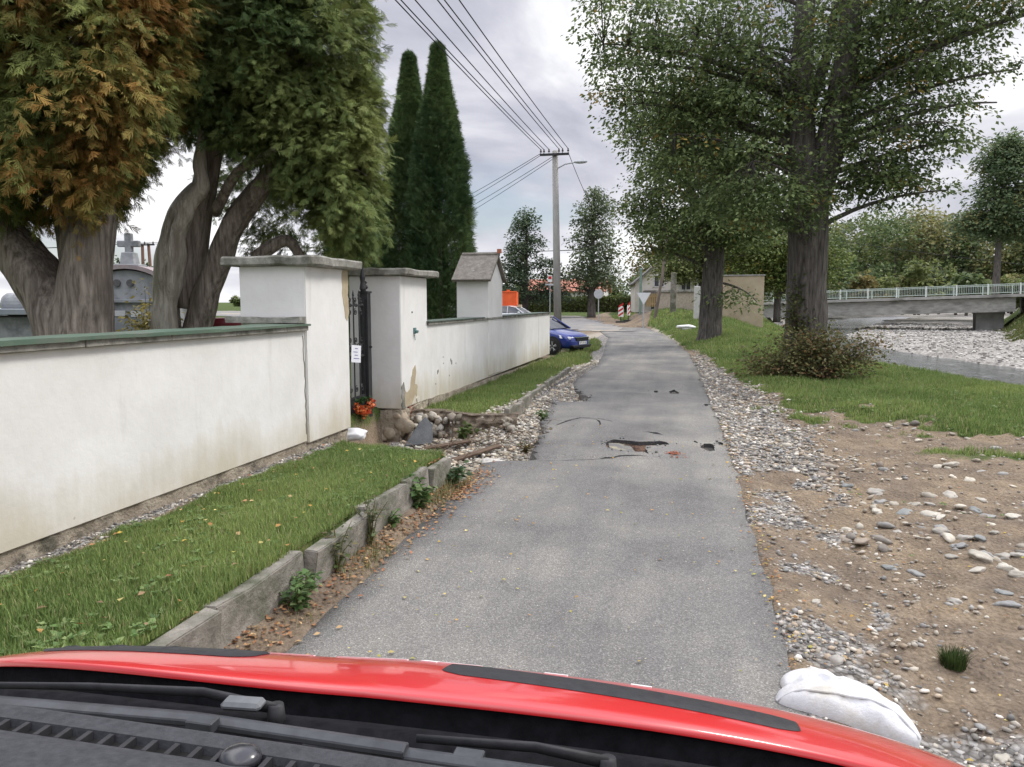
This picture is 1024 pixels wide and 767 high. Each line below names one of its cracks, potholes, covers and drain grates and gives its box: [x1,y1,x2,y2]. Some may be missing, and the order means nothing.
pothole [606,439,670,453]
